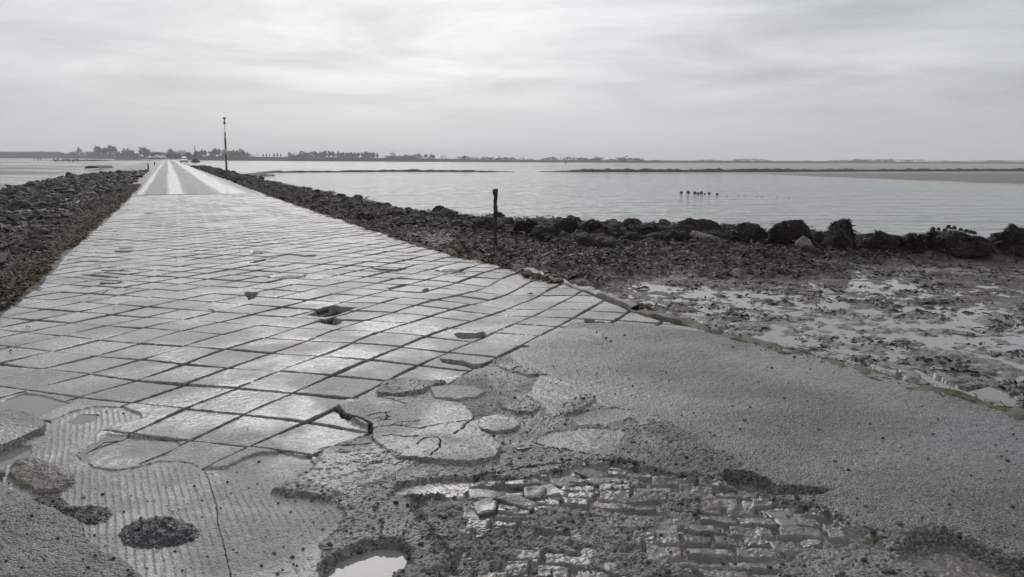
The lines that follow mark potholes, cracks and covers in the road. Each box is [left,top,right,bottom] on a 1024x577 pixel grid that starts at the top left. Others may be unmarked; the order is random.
pothole [313,318,344,326]
crack [205,472,232,577]
pothole [308,305,359,317]
